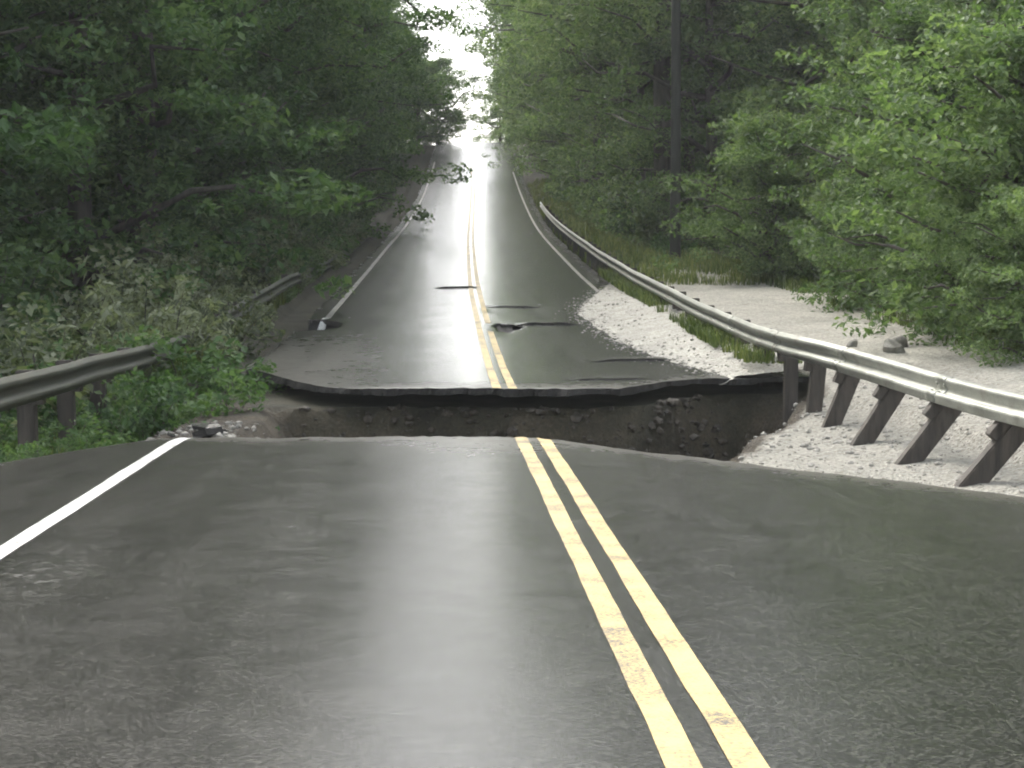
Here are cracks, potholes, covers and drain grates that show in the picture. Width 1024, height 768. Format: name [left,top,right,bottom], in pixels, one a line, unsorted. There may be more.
crack [564,357,671,380]
crack [434,286,580,330]
pothole [496,325,524,333]
